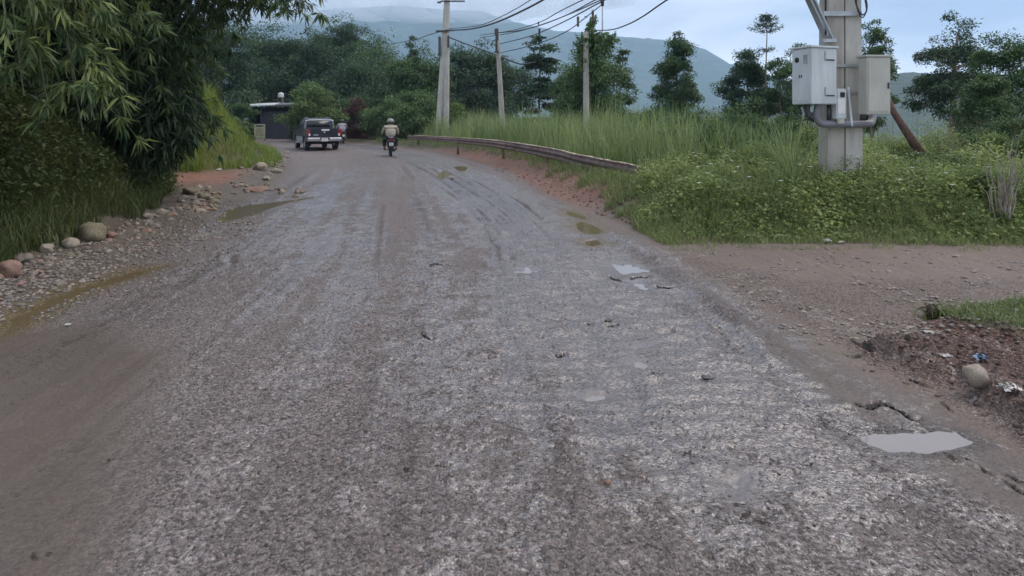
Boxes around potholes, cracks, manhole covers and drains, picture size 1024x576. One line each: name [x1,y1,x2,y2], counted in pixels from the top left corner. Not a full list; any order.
pothole [580,238,607,247]
pothole [205,194,323,225]
pothole [842,425,987,458]
pothole [600,260,655,279]
pothole [571,219,609,234]
crack [855,379,953,422]
crack [947,454,1024,494]
pothole [434,170,453,180]
